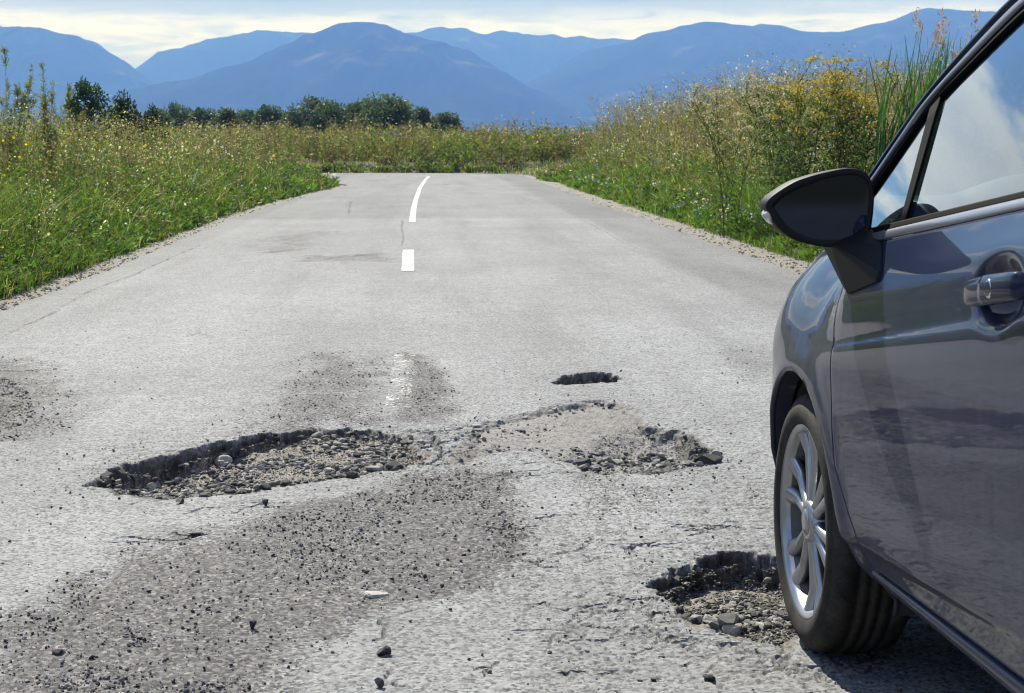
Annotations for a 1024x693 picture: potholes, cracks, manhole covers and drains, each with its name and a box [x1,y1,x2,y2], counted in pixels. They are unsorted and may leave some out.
crack [347,201,451,245]
pothole [549,371,627,385]
crack [104,532,213,545]
pothole [444,400,734,476]
pothole [82,426,438,502]
crack [473,513,774,569]
pothole [642,550,800,652]
pothole [0,366,49,437]
